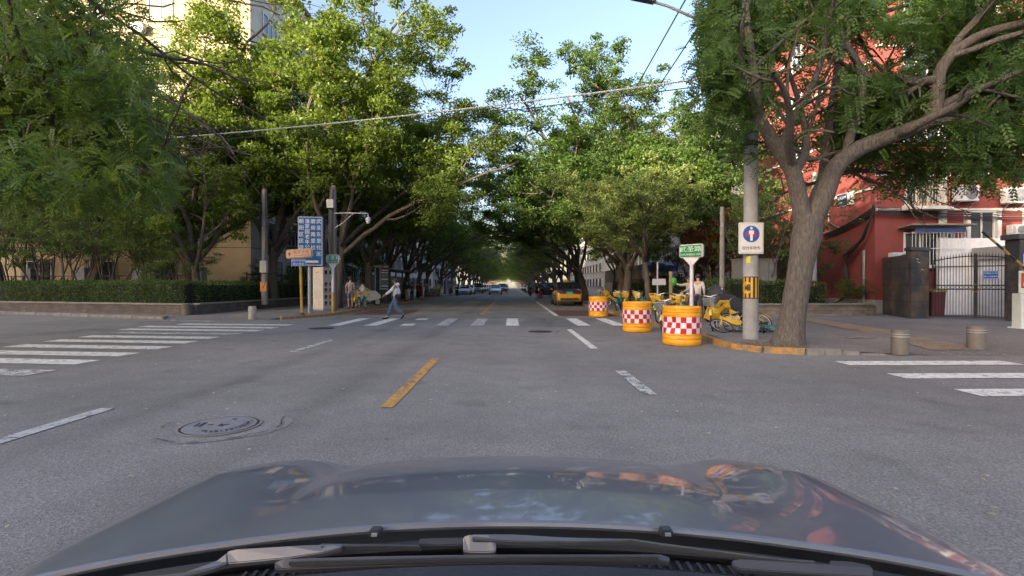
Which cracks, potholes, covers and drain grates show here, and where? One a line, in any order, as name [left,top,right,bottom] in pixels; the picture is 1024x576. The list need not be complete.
manhole cover [175,415,263,437]
